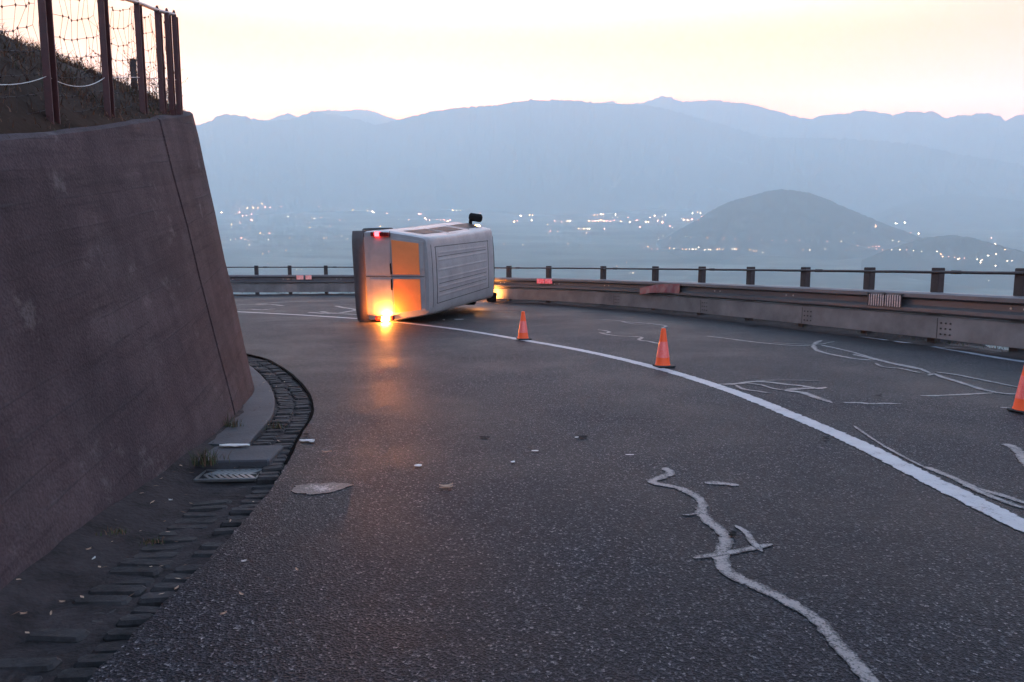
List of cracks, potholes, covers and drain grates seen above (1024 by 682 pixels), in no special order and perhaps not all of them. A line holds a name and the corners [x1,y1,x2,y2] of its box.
crack [600,320,668,344]
crack [853,426,1024,509]
drain grate [193,468,262,484]
crack [707,336,1018,409]
